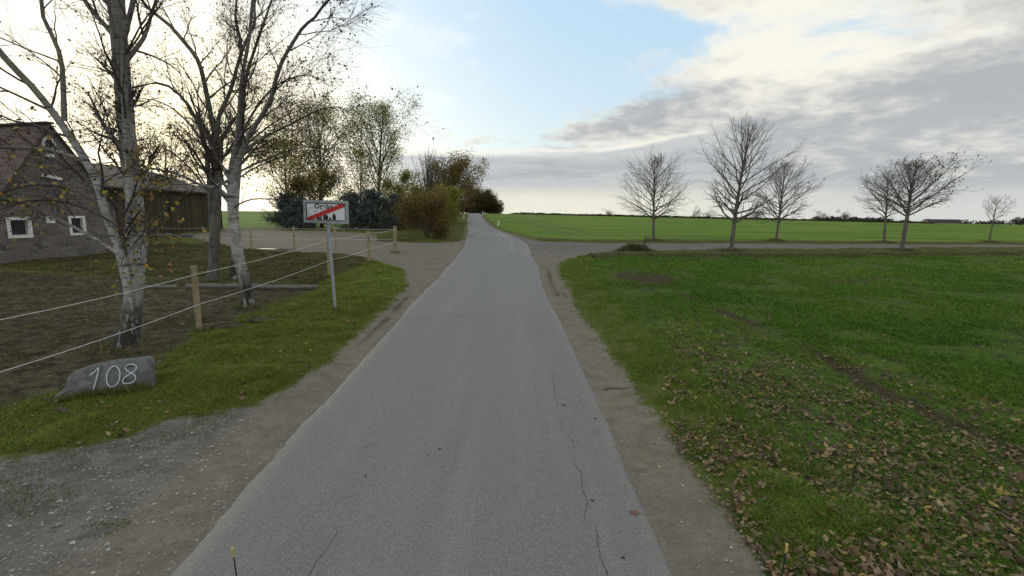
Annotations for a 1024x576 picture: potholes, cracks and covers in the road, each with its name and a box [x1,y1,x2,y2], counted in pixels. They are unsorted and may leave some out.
crack [553,376,608,575]
